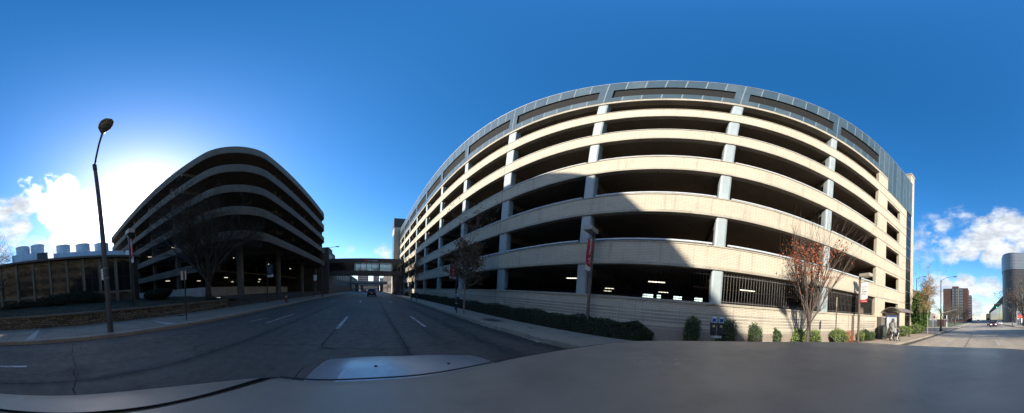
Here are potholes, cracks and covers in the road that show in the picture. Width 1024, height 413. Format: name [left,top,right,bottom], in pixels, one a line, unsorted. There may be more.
crack [11,347,146,395]
